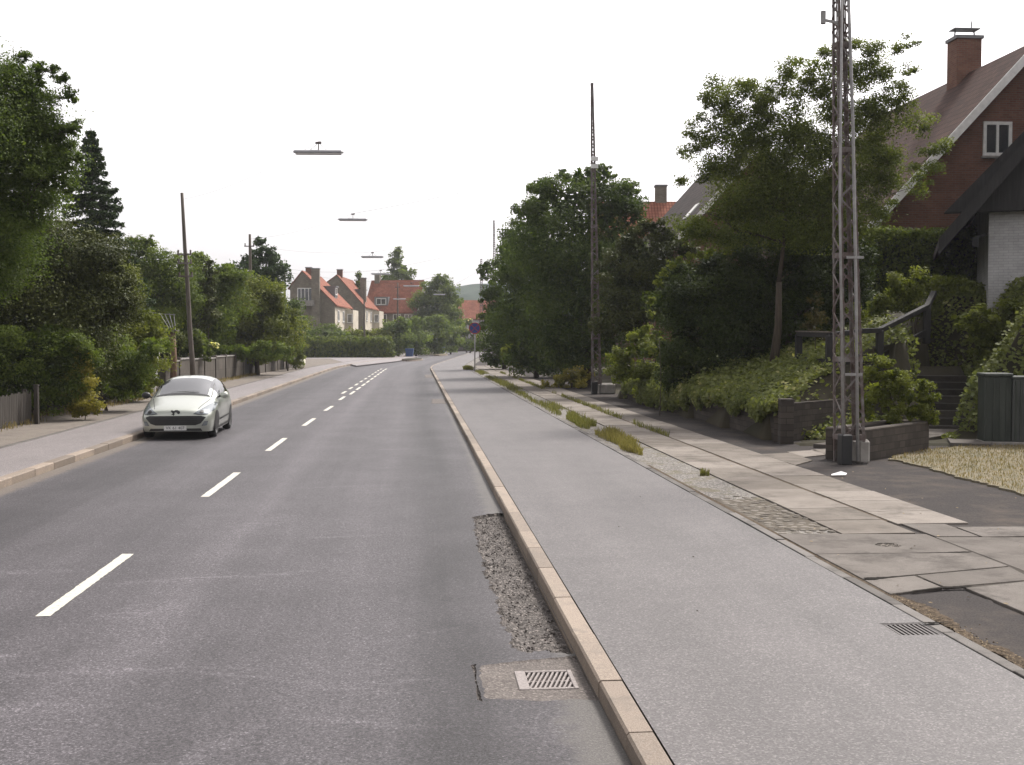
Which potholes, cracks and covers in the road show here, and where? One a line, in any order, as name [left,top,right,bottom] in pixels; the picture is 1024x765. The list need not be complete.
drain grate [881,623,942,636]
drain grate [514,670,579,691]
pothole [472,513,573,657]
crack [471,664,483,701]
